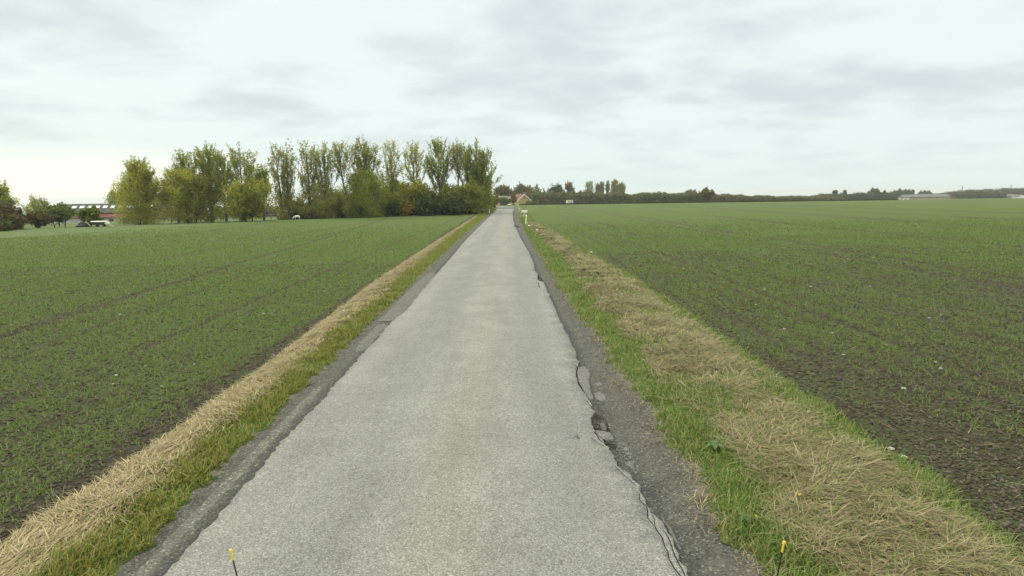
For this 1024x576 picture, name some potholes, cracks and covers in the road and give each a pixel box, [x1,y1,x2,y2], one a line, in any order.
pothole [591,413,610,432]
crack [616,467,686,576]
